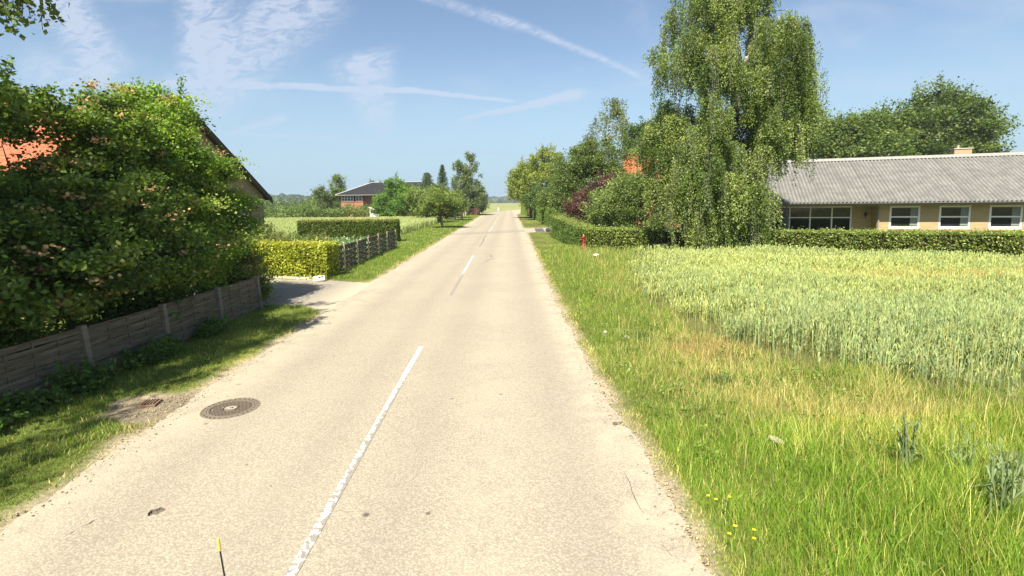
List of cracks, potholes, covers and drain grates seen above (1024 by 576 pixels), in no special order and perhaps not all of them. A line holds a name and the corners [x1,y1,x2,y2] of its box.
manhole cover [200,398,261,419]
drain grate [137,398,162,409]
